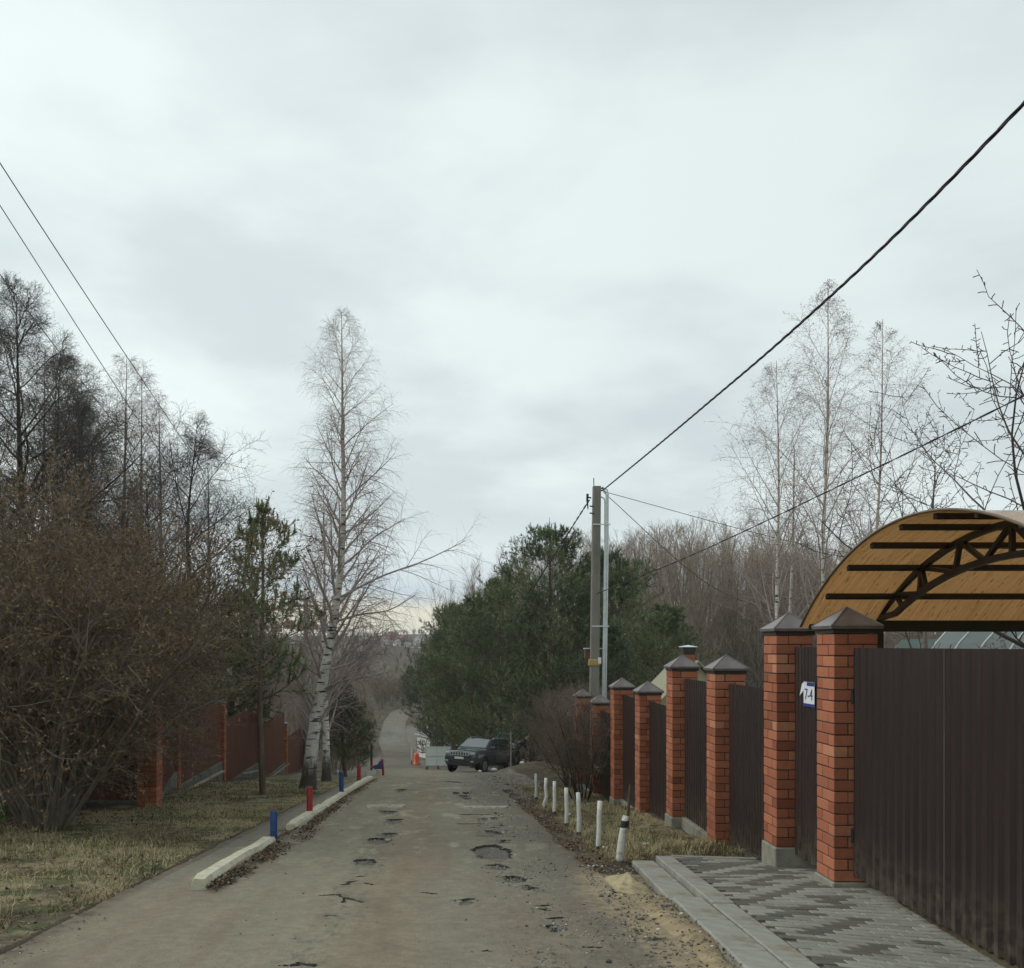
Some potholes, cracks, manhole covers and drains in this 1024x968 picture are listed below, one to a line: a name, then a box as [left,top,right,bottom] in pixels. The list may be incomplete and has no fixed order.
pothole [449,897,484,906]
crack [316,875,377,917]
pothole [466,844,518,860]
pothole [497,875,531,883]
pothole [349,858,383,866]
